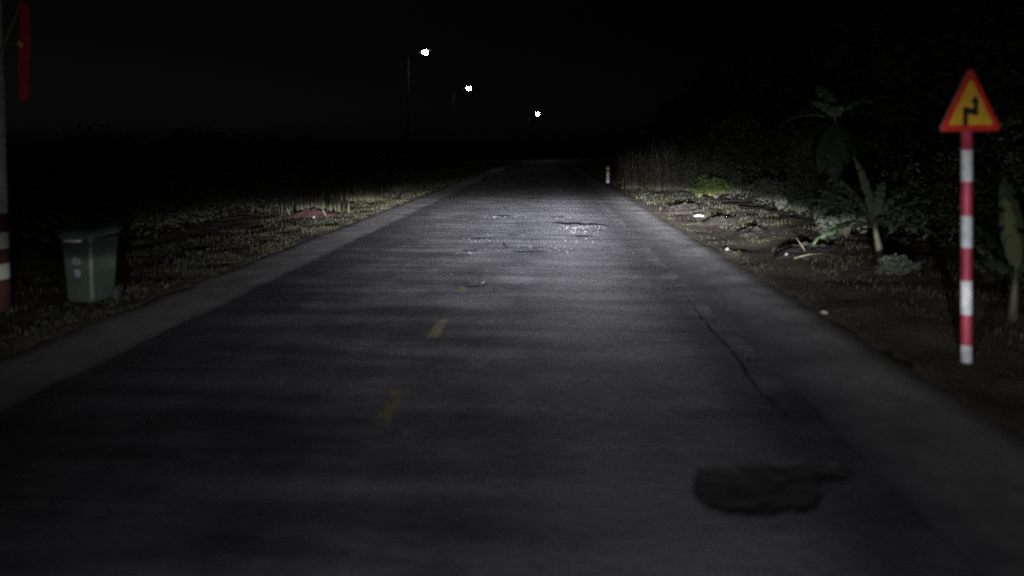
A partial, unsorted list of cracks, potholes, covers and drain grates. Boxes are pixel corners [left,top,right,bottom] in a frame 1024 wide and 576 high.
crack [687,298,802,425]
